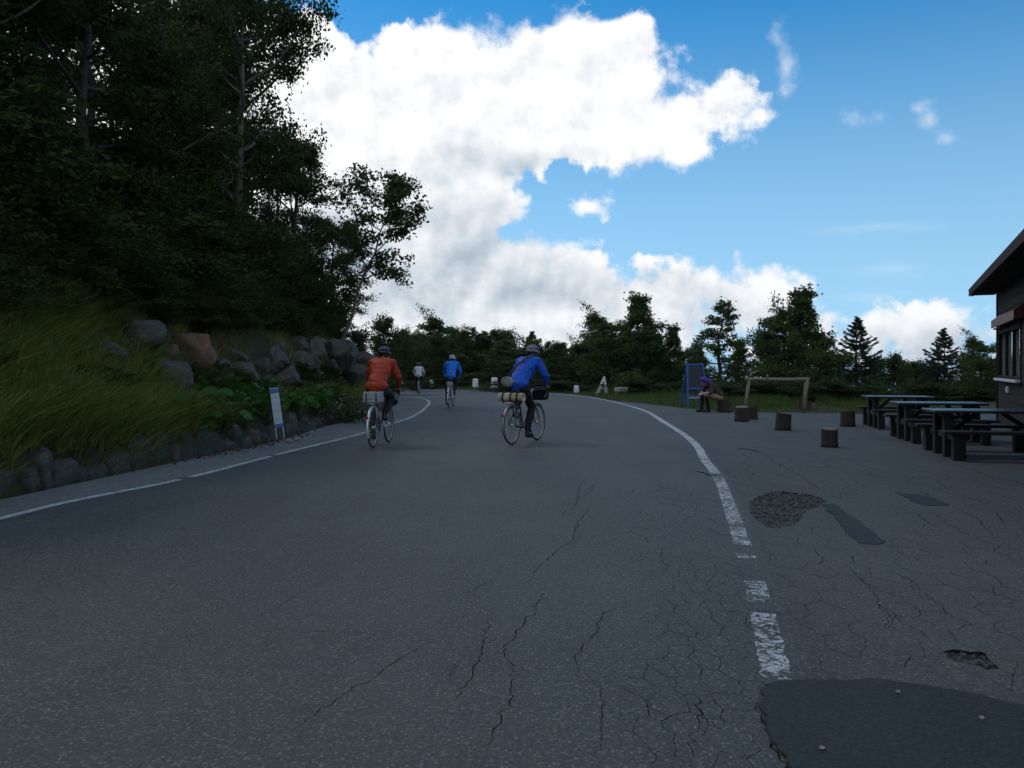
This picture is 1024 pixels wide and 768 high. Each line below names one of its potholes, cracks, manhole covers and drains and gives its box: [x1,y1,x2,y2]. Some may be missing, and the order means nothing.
pothole [748,490,825,528]
pothole [943,649,999,670]
crack [280,645,422,733]
crack [451,479,590,742]
crack [617,448,1024,768]
crack [574,598,648,758]
